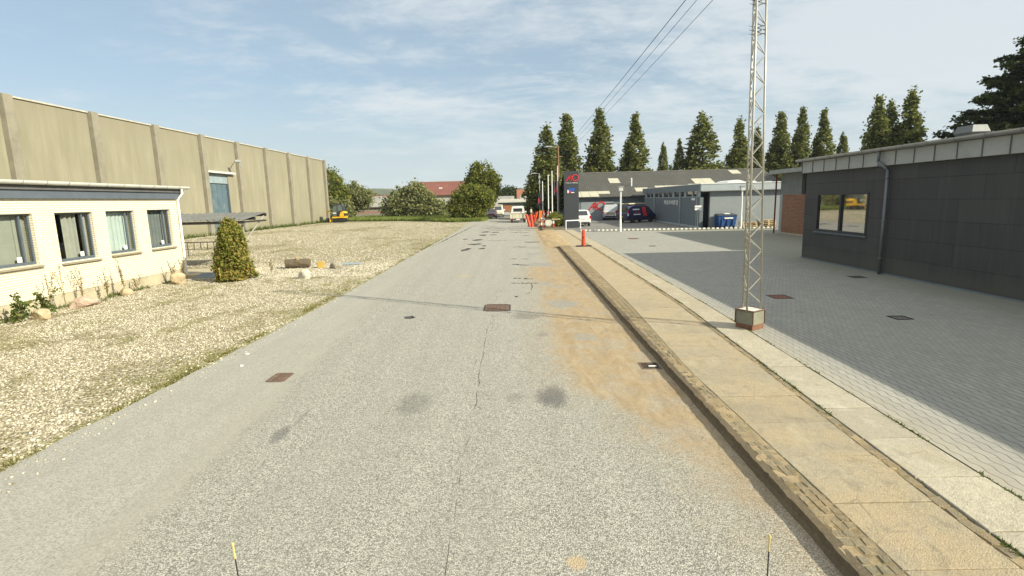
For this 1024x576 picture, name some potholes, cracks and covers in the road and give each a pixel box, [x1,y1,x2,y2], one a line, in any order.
manhole cover [266,373,294,382]
crack [470,228,536,409]
